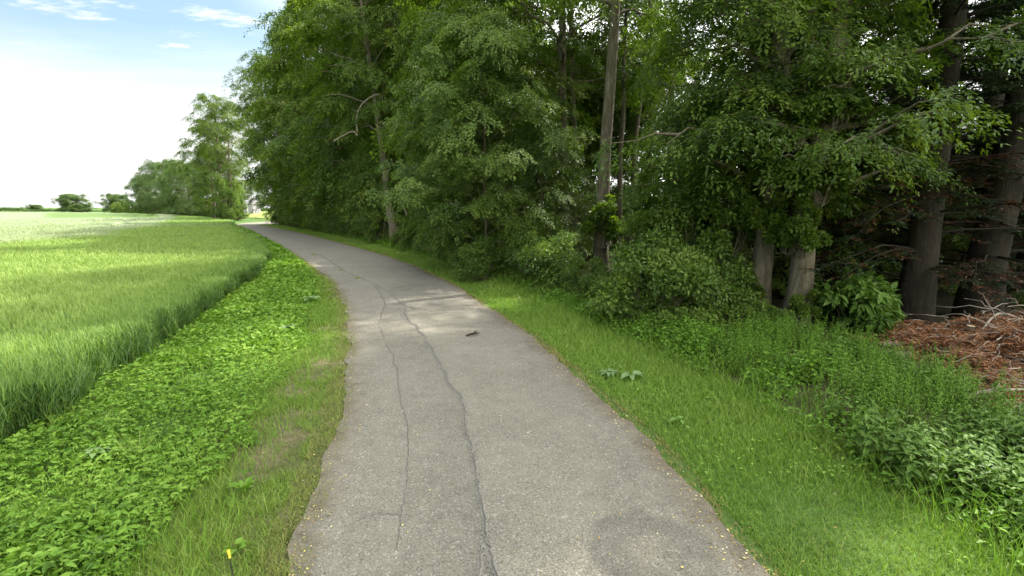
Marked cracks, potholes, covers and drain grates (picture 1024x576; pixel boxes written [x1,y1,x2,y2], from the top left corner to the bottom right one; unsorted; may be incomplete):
crack [320,254,502,576]
